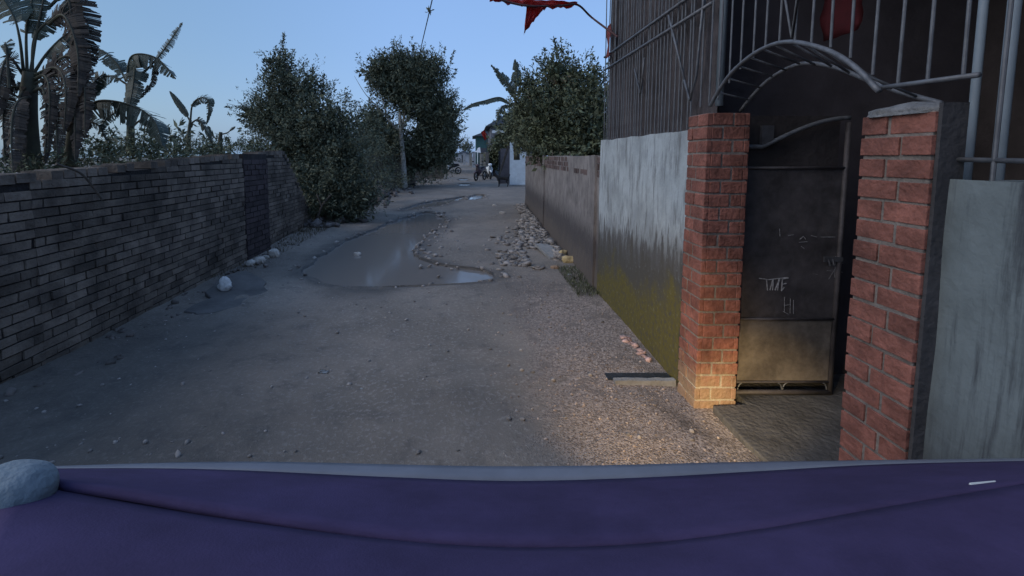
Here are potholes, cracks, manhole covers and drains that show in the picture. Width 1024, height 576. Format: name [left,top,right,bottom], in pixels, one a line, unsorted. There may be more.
pothole [394,196,468,211]
pothole [288,211,522,290]
